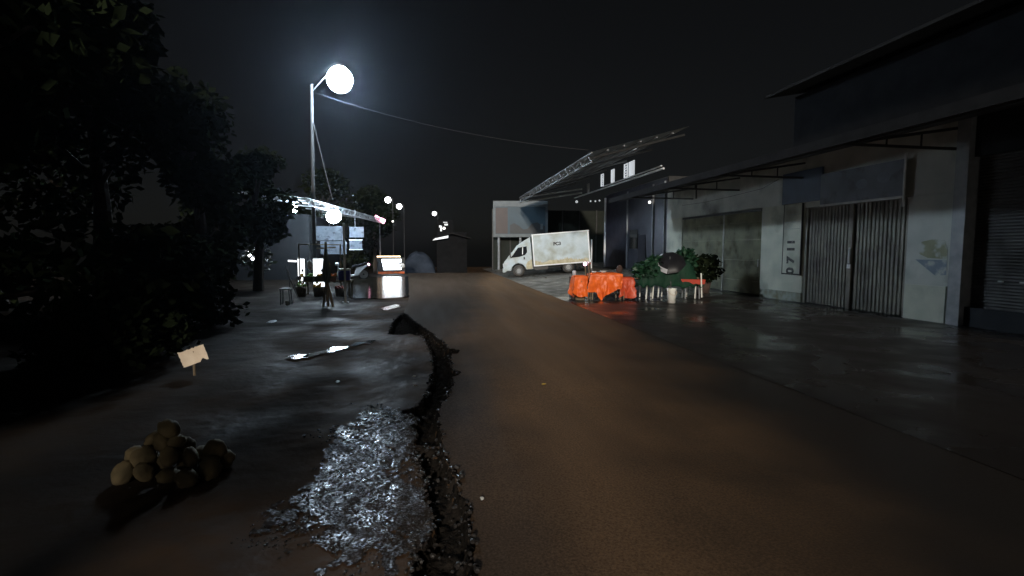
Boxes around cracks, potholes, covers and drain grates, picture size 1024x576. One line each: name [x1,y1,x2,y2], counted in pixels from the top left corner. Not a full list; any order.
crack [401,332,461,452]
